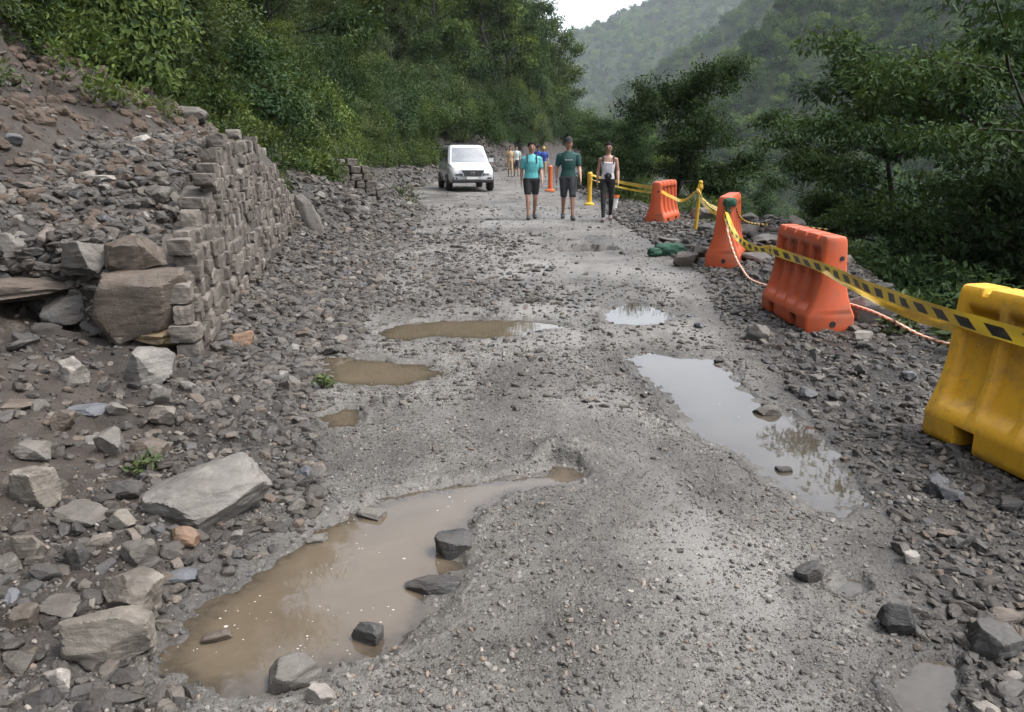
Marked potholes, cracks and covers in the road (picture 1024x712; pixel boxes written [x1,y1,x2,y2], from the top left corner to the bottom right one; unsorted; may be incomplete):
pothole [314,353,451,388]
pothole [369,316,579,342]
pothole [132,435,609,712]
pothole [615,347,886,527]
pothole [596,298,687,326]
pothole [313,403,375,430]
